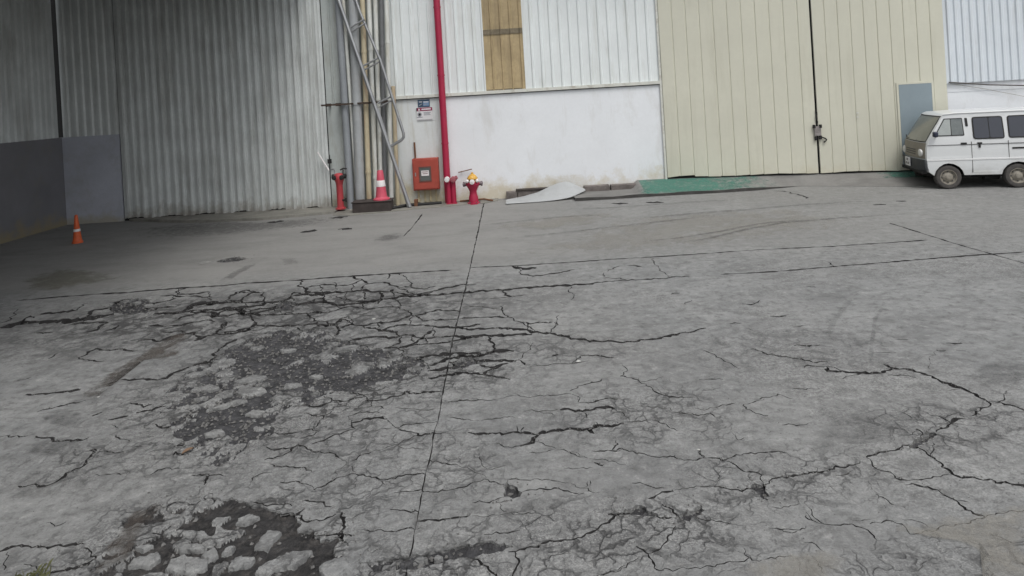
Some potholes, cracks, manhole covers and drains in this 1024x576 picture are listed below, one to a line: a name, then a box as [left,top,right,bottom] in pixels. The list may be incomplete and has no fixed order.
pothole [160,328,430,467]
crack [0,257,1024,576]
pothole [90,493,349,576]
